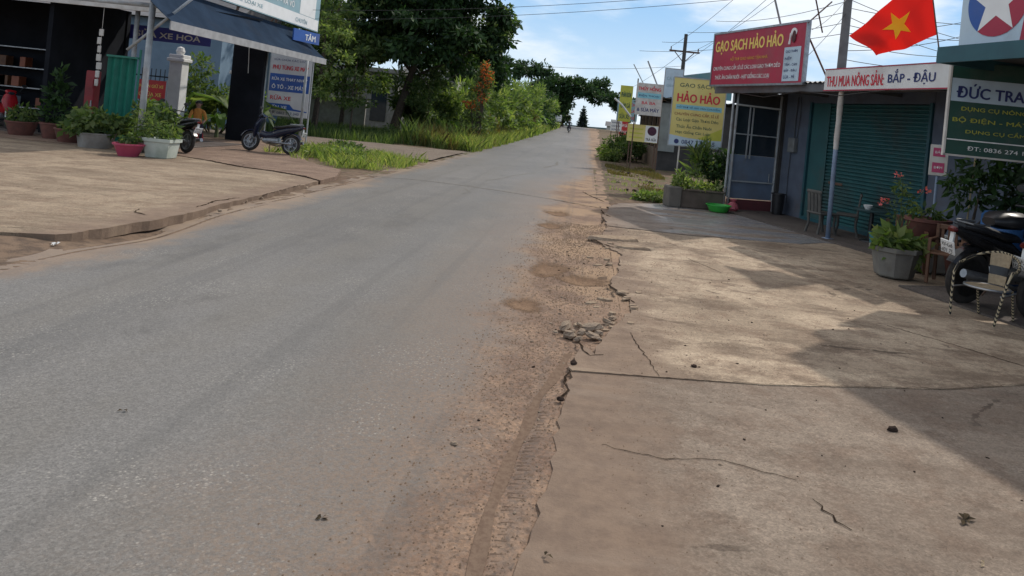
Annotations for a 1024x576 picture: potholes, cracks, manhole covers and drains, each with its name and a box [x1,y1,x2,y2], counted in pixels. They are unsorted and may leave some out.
crack [560,338,604,397]
crack [813,499,852,530]
pothole [556,275,605,286]
pothole [506,299,539,312]
crack [602,444,795,480]
pothole [532,263,568,278]
